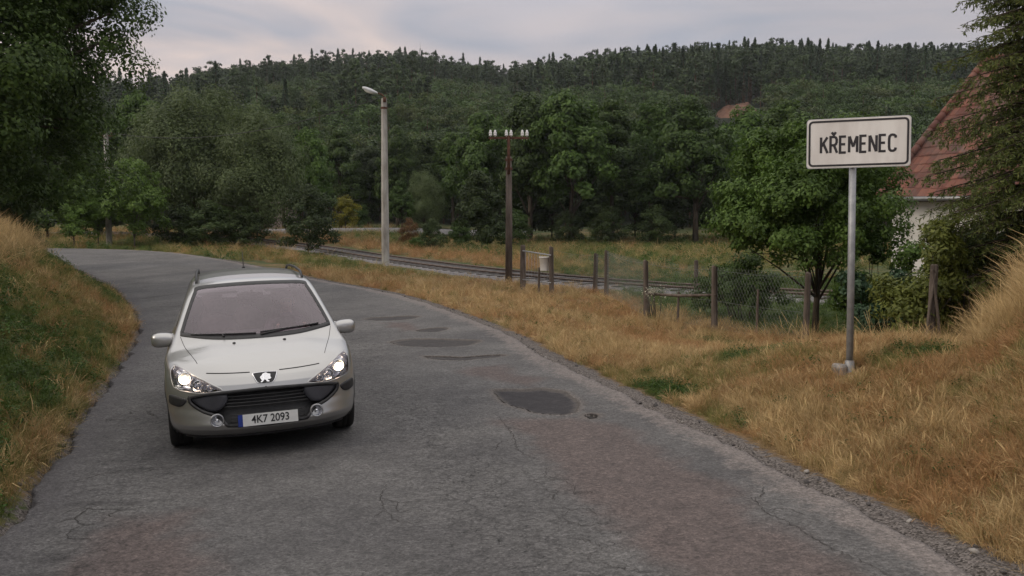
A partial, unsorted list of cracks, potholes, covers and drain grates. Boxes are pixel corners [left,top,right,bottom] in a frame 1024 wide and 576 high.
crack [56,507,142,539]
crack [375,484,428,522]
crack [736,485,881,571]
